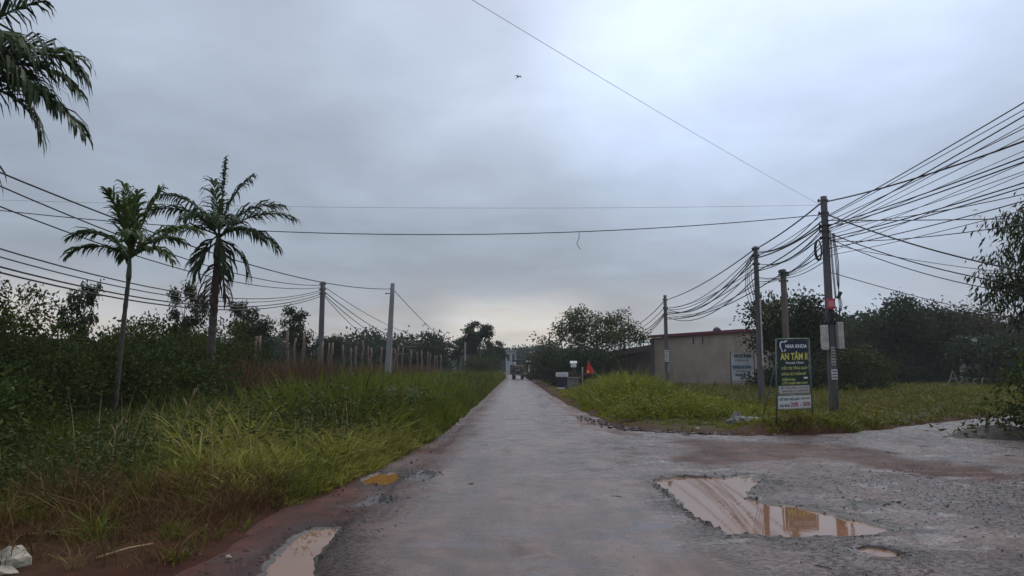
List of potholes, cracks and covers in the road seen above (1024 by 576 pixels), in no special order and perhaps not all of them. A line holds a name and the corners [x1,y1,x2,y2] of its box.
pothole [360,470,401,486]
pothole [353,494,410,508]
pothole [249,524,346,576]
pothole [648,474,892,538]
pothole [855,544,907,559]
pothole [403,468,443,482]
